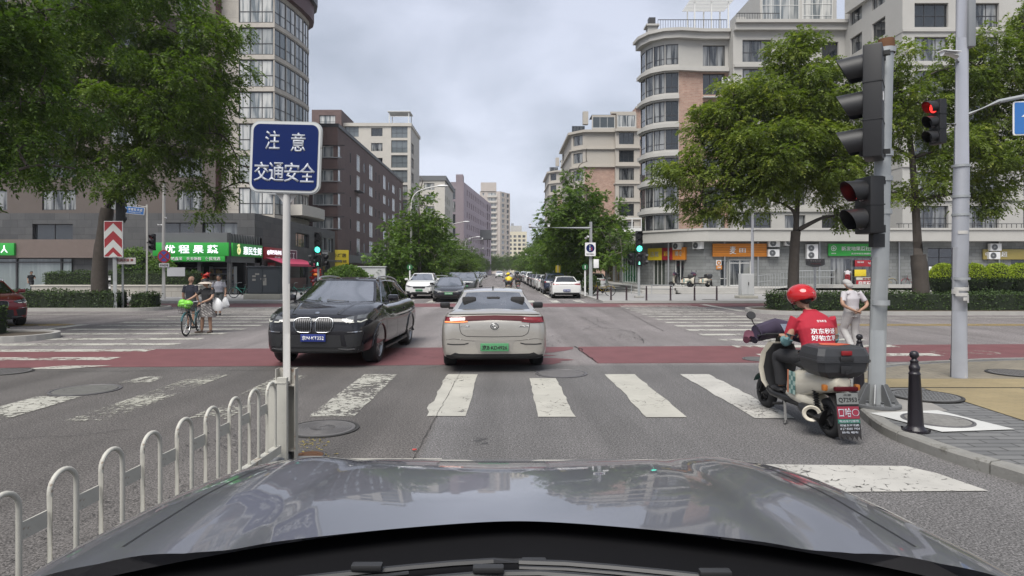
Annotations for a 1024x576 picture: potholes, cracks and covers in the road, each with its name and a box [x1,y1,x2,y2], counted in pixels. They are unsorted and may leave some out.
manhole cover [900,413,977,428]
manhole cover [984,369,1024,377]
manhole cover [298,419,359,438]
manhole cover [535,369,587,378]
manhole cover [891,389,966,403]
manhole cover [47,384,122,396]
